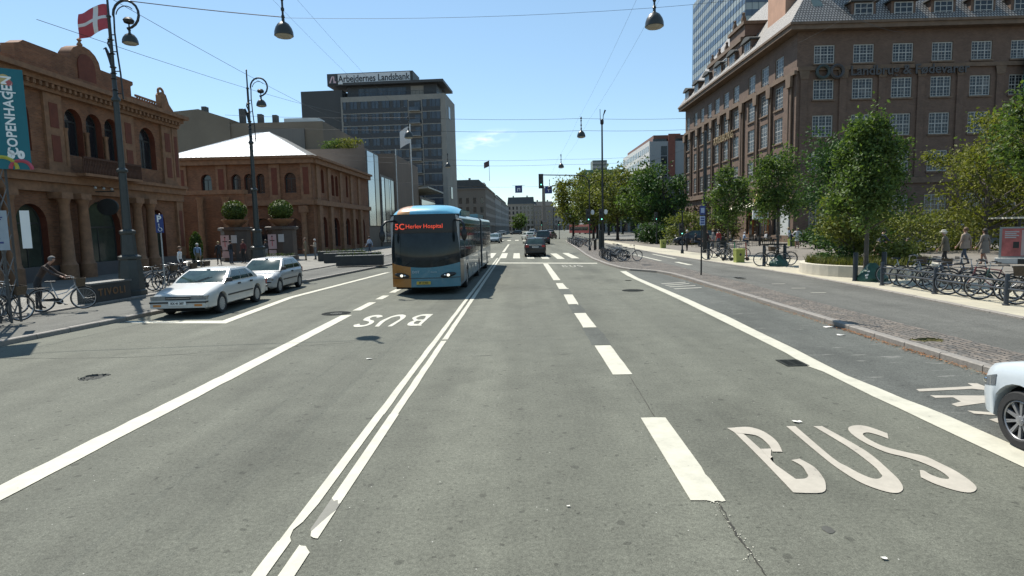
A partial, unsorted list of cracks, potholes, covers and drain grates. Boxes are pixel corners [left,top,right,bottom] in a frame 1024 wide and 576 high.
crack [718,502,767,576]
pothole [78,373,111,381]
